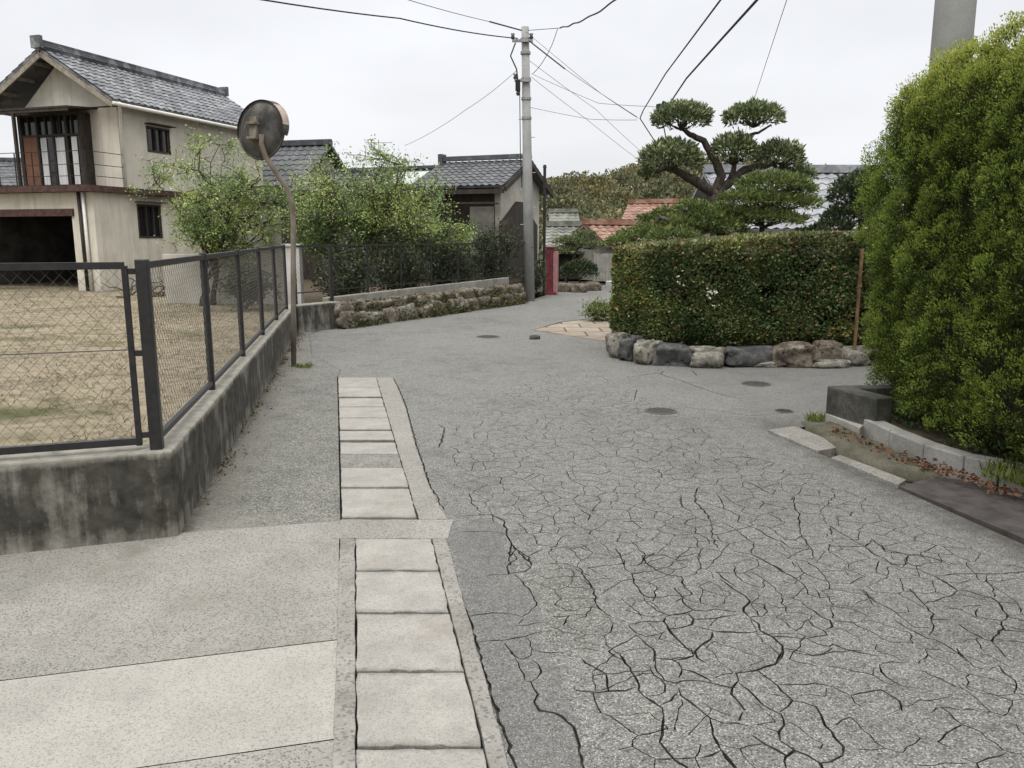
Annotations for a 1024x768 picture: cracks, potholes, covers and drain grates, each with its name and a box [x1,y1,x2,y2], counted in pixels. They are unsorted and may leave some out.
manhole cover [645,407,677,415]
crack [451,371,1024,768]
